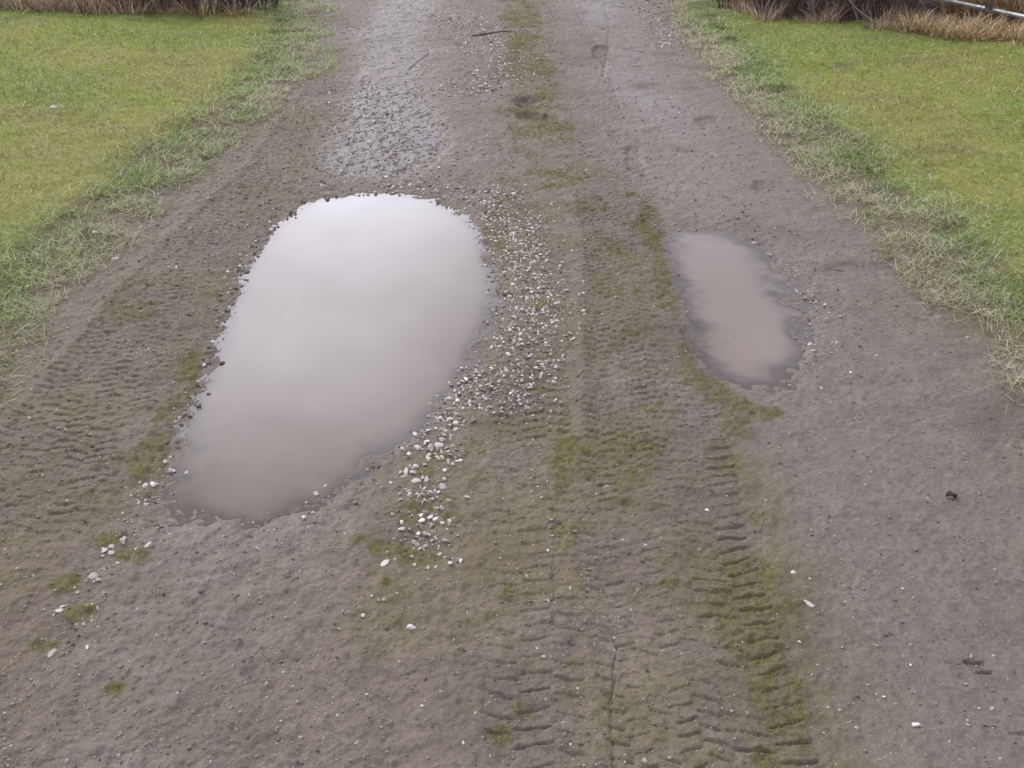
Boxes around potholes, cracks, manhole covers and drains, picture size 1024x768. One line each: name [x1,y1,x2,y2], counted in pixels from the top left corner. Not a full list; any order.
pothole [658,226,818,391]
